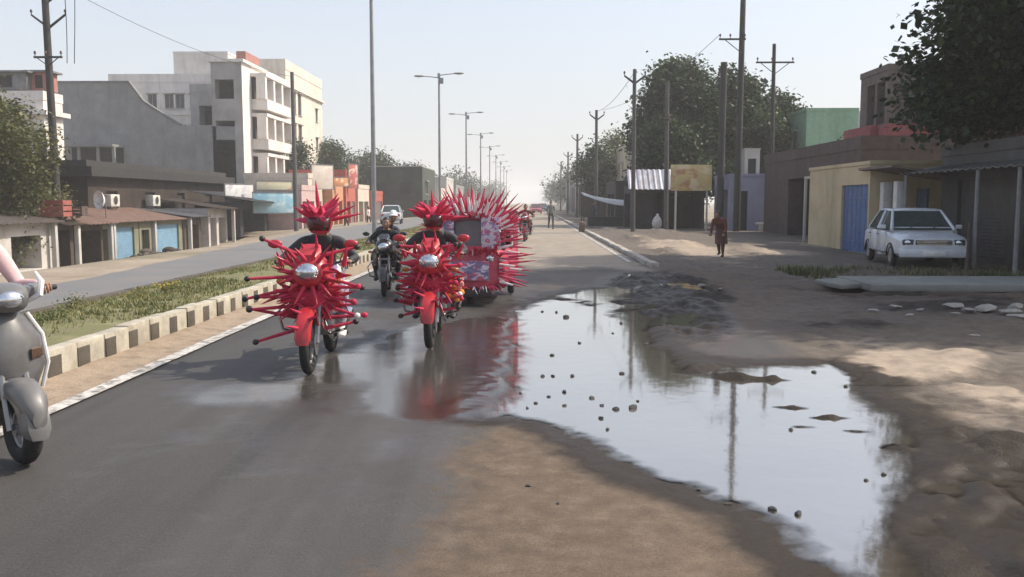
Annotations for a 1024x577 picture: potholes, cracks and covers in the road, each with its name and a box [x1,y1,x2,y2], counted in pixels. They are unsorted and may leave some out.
pothole [591,267,755,352]
pothole [449,287,996,577]
